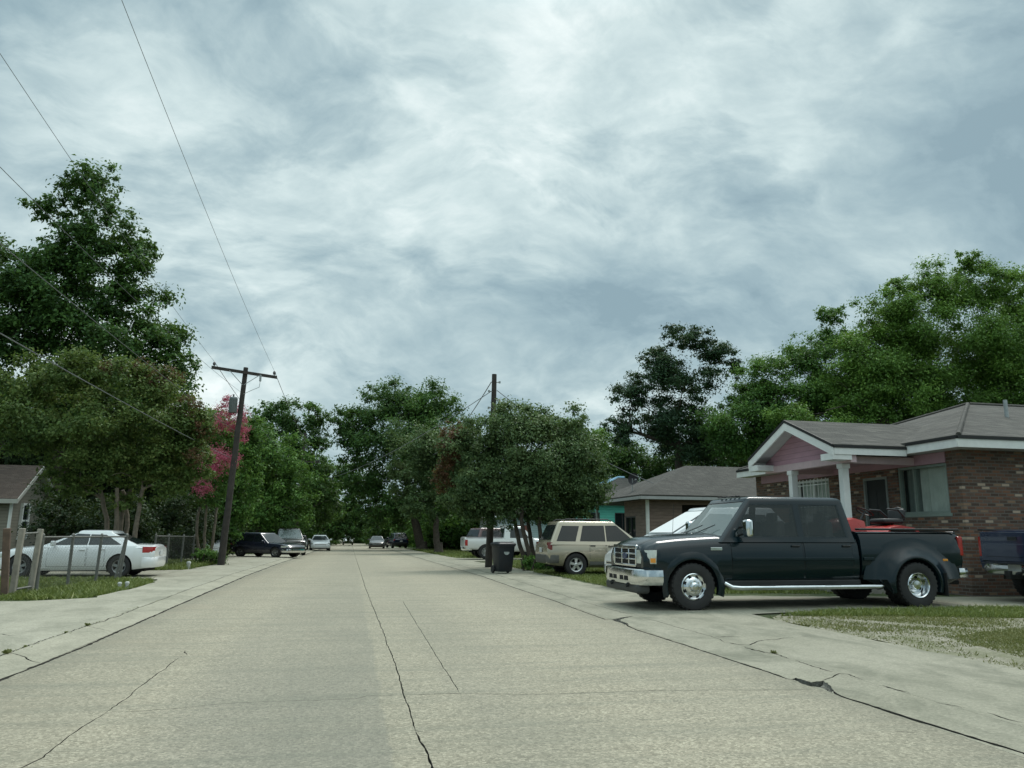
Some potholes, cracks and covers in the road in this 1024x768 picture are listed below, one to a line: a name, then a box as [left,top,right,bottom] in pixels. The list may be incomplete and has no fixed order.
crack [0,545,1024,768]
